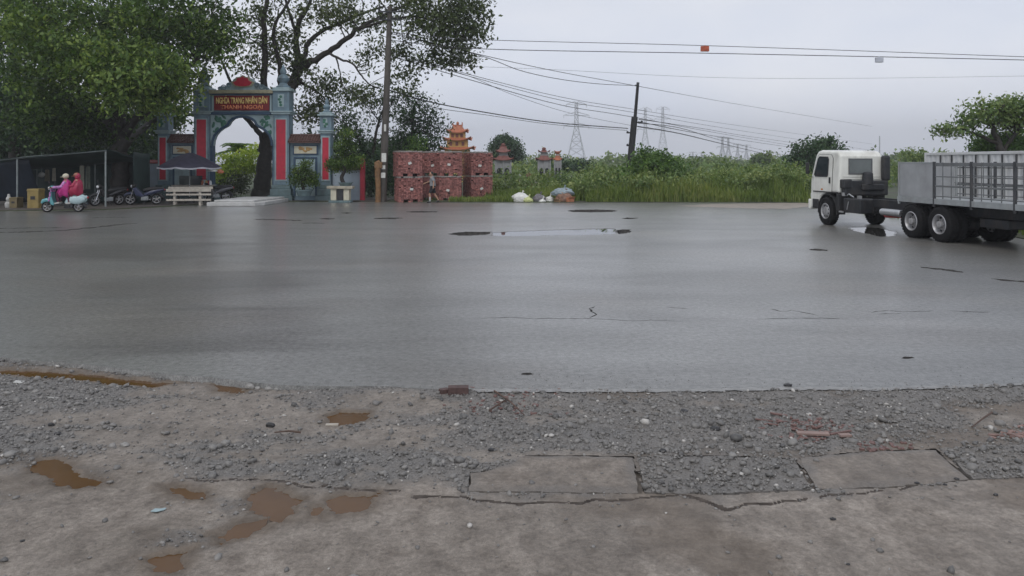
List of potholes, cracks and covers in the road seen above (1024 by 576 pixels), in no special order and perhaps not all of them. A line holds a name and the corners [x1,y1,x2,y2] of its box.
pothole [0,366,182,388]
pothole [323,409,374,426]
pothole [204,516,274,547]
pothole [24,457,111,490]
pothole [243,483,312,524]
crack [501,307,972,321]
pothole [320,490,387,516]
pothole [156,483,211,502]
crack [185,477,915,512]
pothole [140,543,201,574]
pothole [210,383,249,394]
